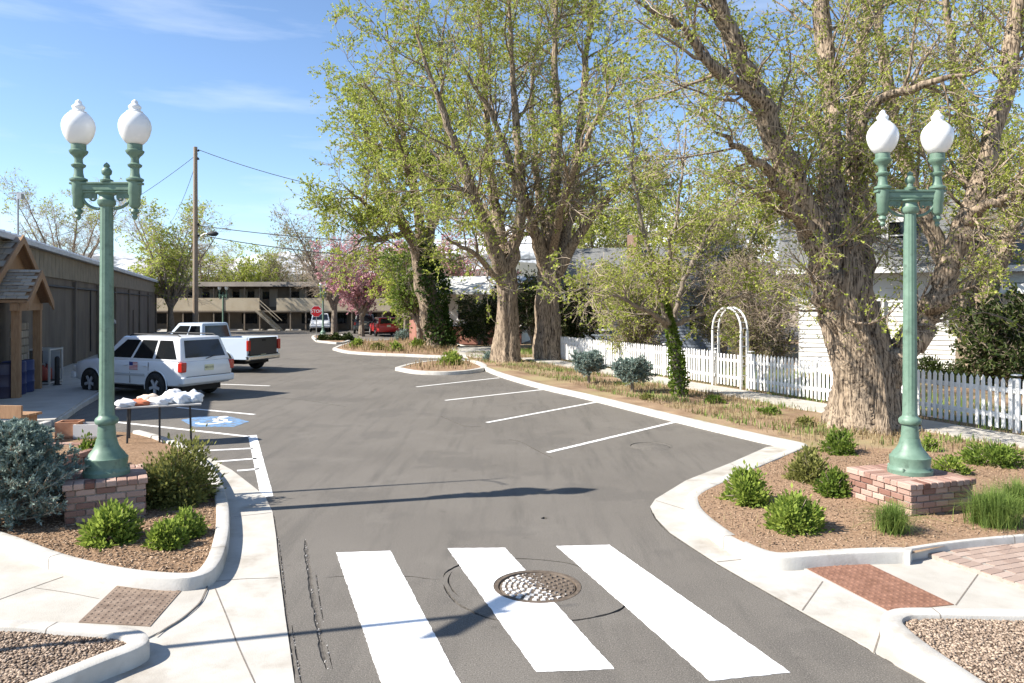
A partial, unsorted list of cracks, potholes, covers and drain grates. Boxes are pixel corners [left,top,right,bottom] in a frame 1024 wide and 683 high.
manhole cover [494,570,581,603]
